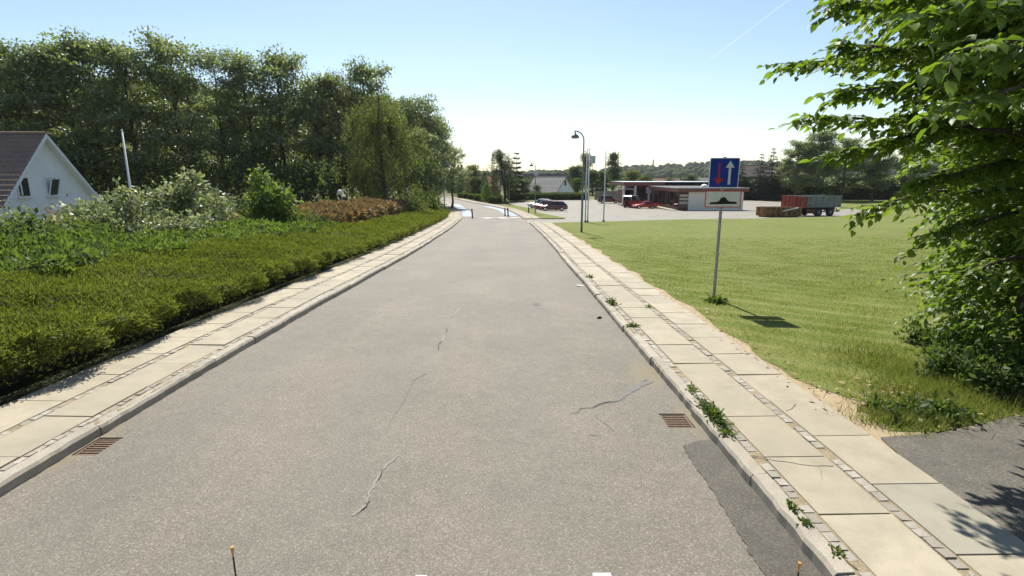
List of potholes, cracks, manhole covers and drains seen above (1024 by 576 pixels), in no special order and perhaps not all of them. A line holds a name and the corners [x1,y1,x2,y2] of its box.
drain grate [72,438,122,455]
drain grate [659,414,695,428]
